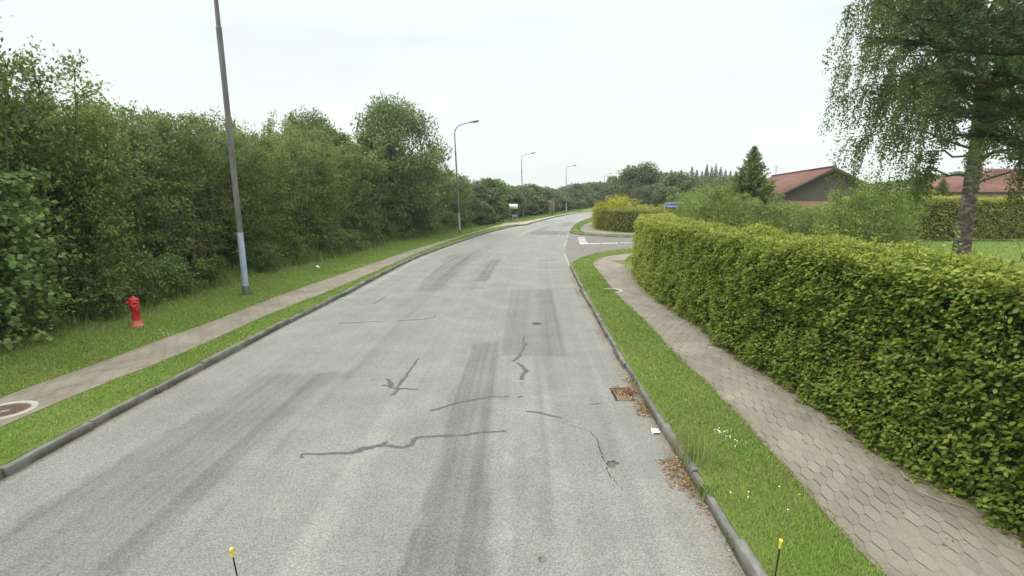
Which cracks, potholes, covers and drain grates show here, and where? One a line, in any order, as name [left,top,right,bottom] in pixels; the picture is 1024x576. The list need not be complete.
manhole cover [0,400,39,420]
drain grate [609,388,636,401]
